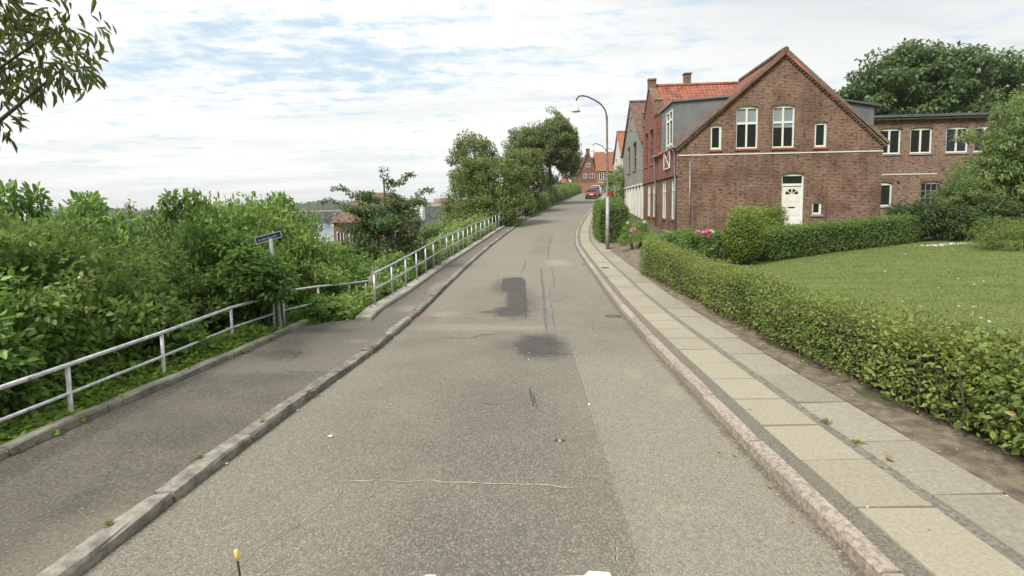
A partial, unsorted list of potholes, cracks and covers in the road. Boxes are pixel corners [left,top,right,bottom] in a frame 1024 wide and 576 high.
crack [434,215,563,339]
crack [227,479,580,576]
crack [607,532,625,576]
